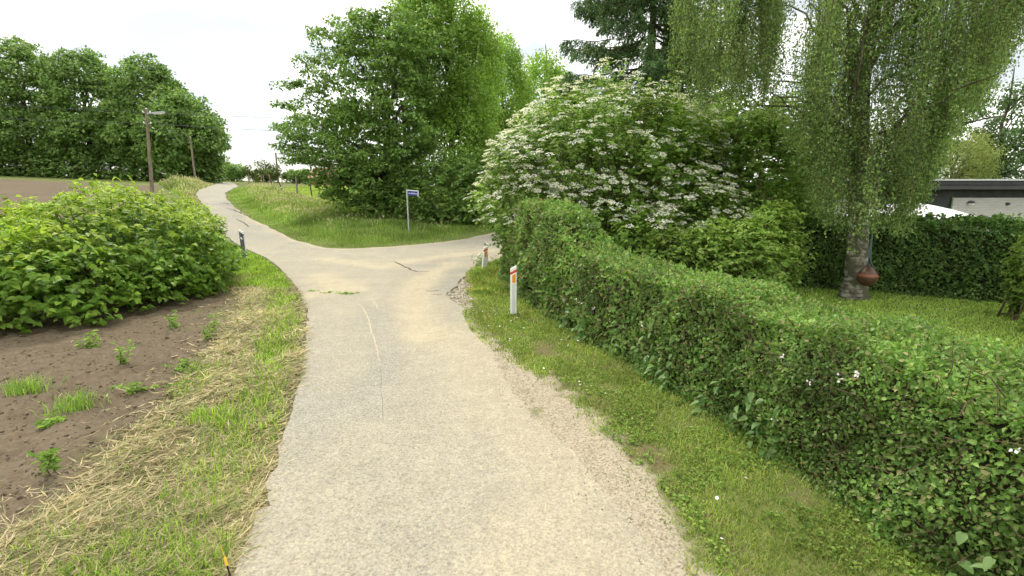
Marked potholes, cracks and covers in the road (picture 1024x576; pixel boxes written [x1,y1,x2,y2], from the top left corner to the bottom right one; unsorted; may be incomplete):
crack [315,298,383,416]
